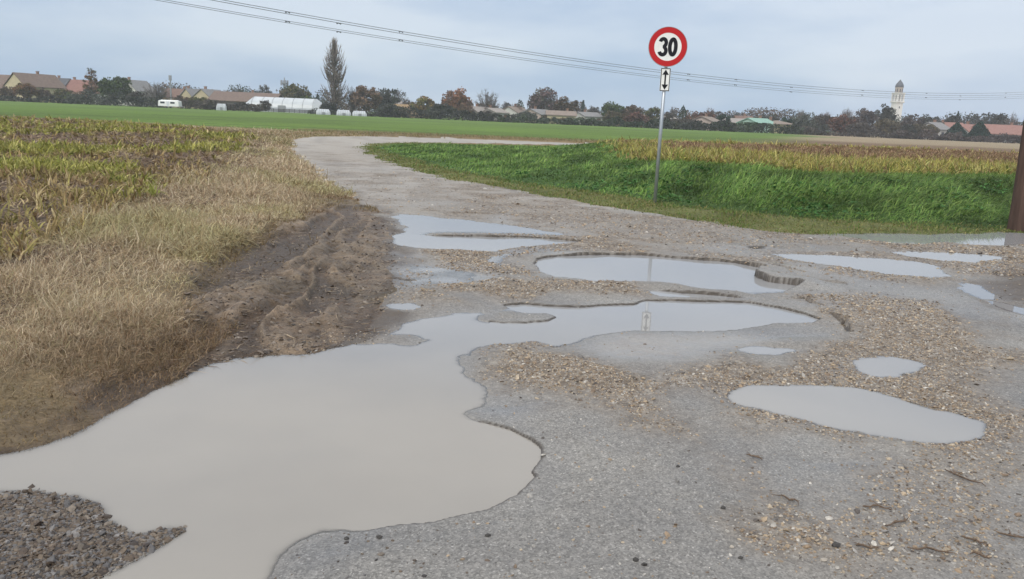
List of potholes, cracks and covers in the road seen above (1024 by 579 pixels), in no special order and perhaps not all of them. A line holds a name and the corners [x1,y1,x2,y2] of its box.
pothole [107,417,553,576]
pothole [530,251,808,294]
pothole [389,234,584,252]
pothole [641,287,750,299]
pothole [726,344,801,356]
pothole [781,252,953,278]
pothole [720,381,998,444]
pothole [847,355,929,378]
pothole [884,250,1003,263]
pothole [484,298,825,345]
